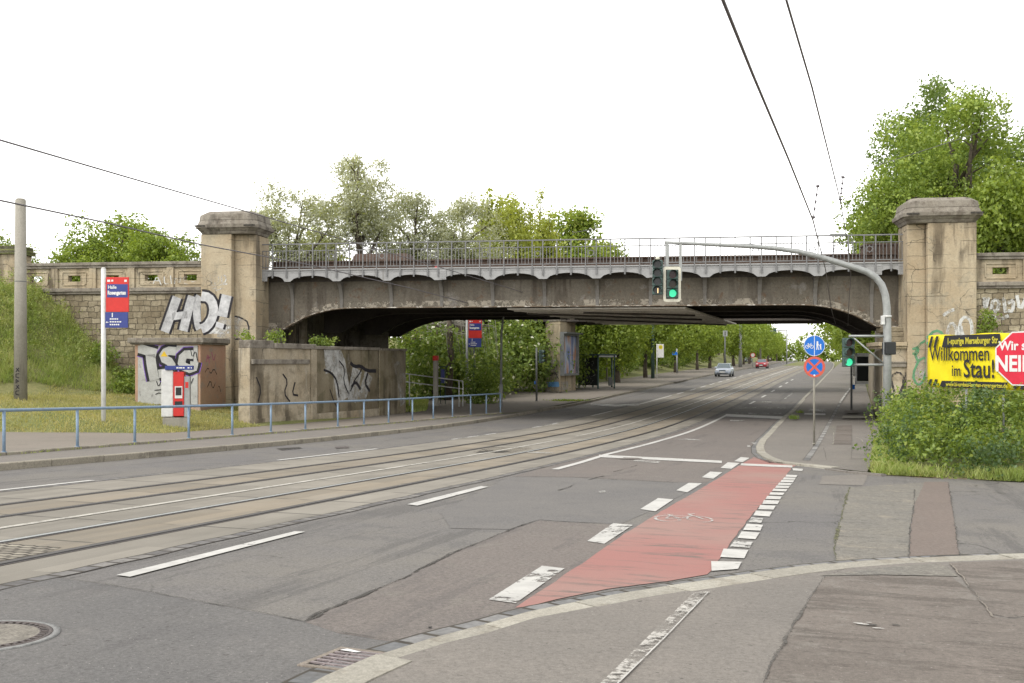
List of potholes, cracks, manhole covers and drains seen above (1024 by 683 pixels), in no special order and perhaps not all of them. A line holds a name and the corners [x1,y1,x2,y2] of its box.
crack [305,520,538,621]
drain grate [297,647,385,671]
manhole cover [0,620,61,651]
